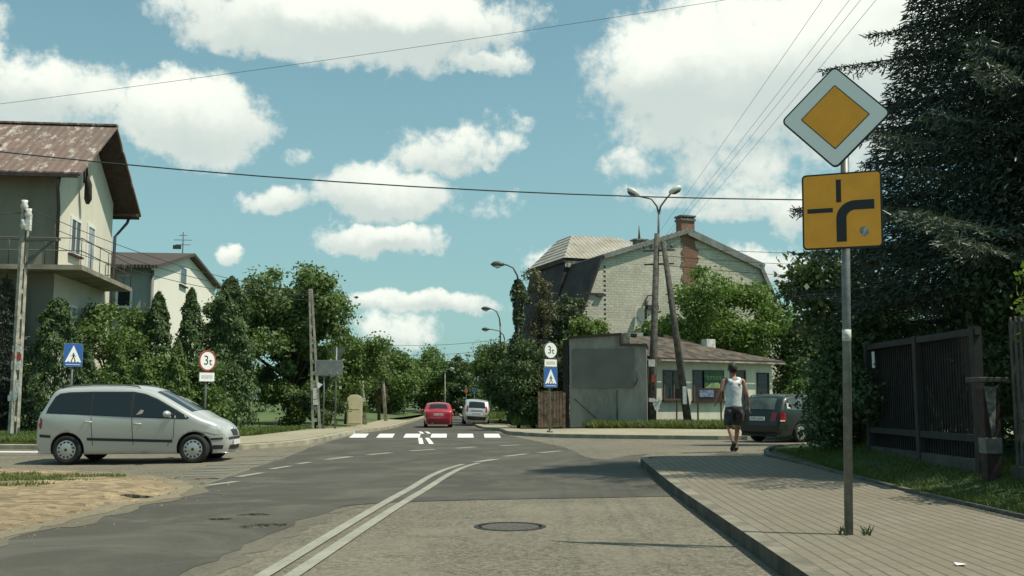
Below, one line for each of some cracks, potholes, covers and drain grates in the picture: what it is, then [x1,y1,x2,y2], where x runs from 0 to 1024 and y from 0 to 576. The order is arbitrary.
manhole cover [474,522,546,531]
